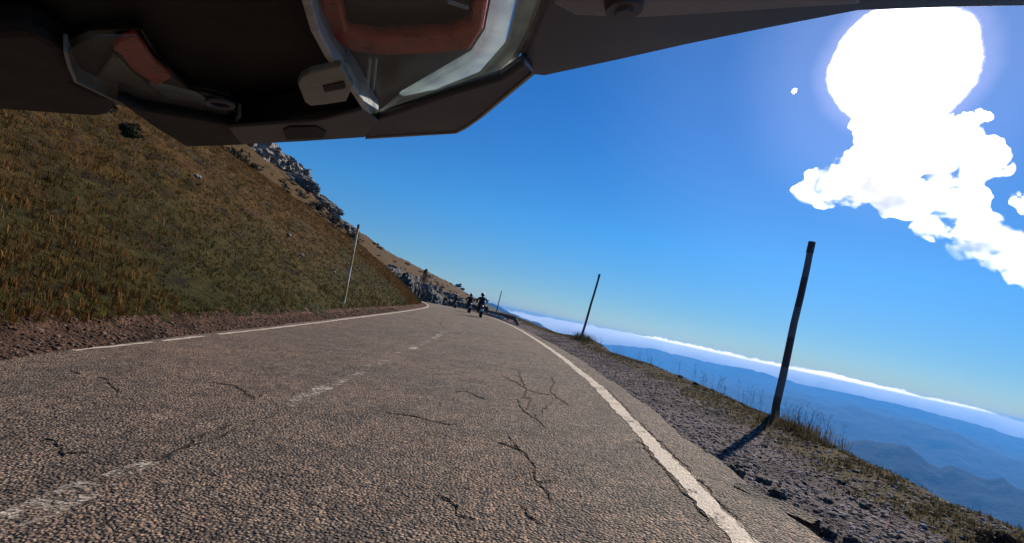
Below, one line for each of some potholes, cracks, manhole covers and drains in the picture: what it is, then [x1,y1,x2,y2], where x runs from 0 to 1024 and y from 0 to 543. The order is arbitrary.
crack [47,437,86,457]
crack [498,370,569,525]
crack [387,412,456,425]
crack [438,495,476,519]
crack [209,382,272,398]
